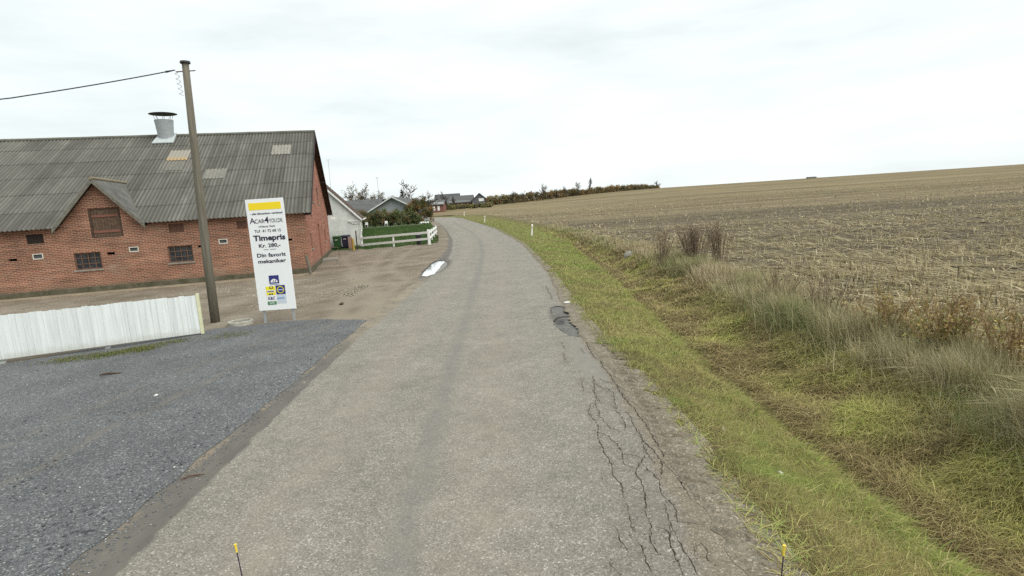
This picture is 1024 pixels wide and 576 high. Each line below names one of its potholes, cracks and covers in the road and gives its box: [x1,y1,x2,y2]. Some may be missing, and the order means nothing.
pothole [421,260,448,276]
pothole [550,306,569,315]
pothole [553,316,579,337]
crack [581,342,709,576]
